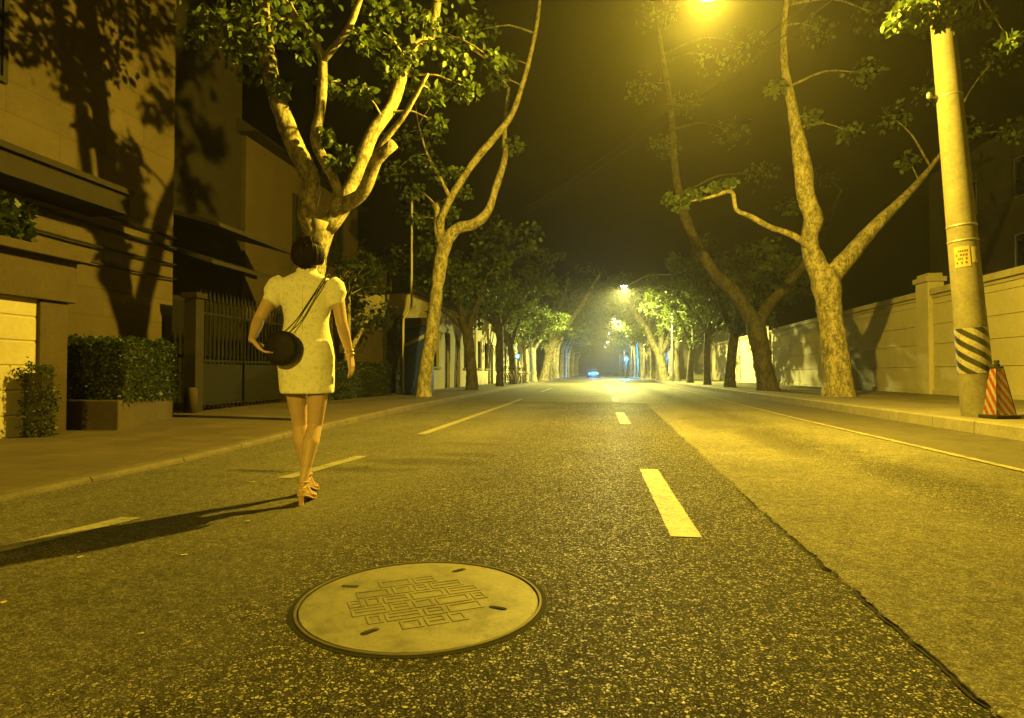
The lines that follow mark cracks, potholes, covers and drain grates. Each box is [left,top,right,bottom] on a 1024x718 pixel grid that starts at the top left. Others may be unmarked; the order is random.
manhole cover [287,561,547,659]
